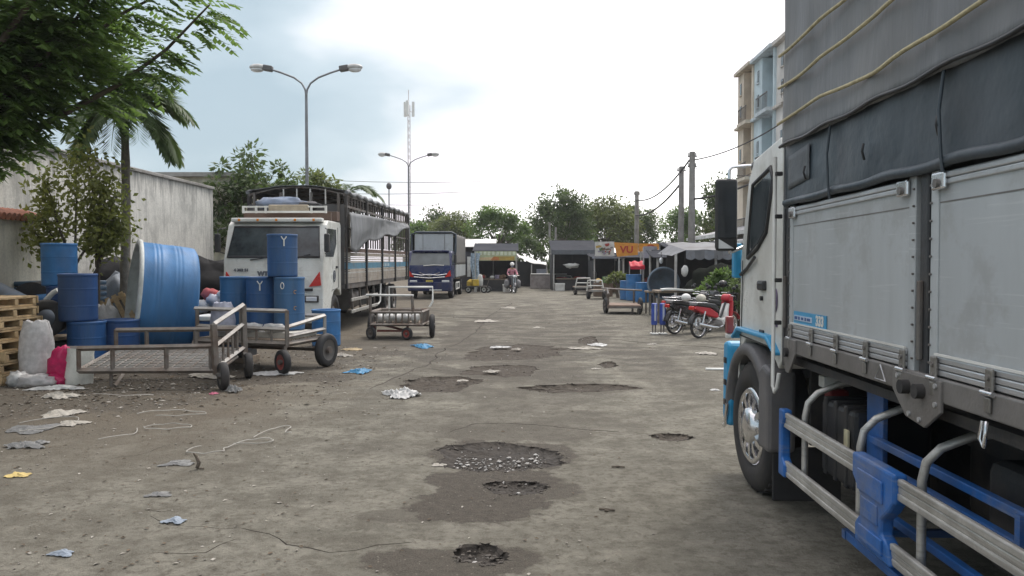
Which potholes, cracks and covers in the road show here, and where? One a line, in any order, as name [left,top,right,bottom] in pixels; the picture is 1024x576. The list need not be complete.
pothole [482,480,551,496]
pothole [463,344,570,362]
pothole [578,336,599,345]
pothole [399,376,484,393]
pothole [648,432,695,442]
pothole [516,383,643,393]
pothole [432,440,568,473]
pothole [459,364,540,378]
pothole [452,542,512,567]
